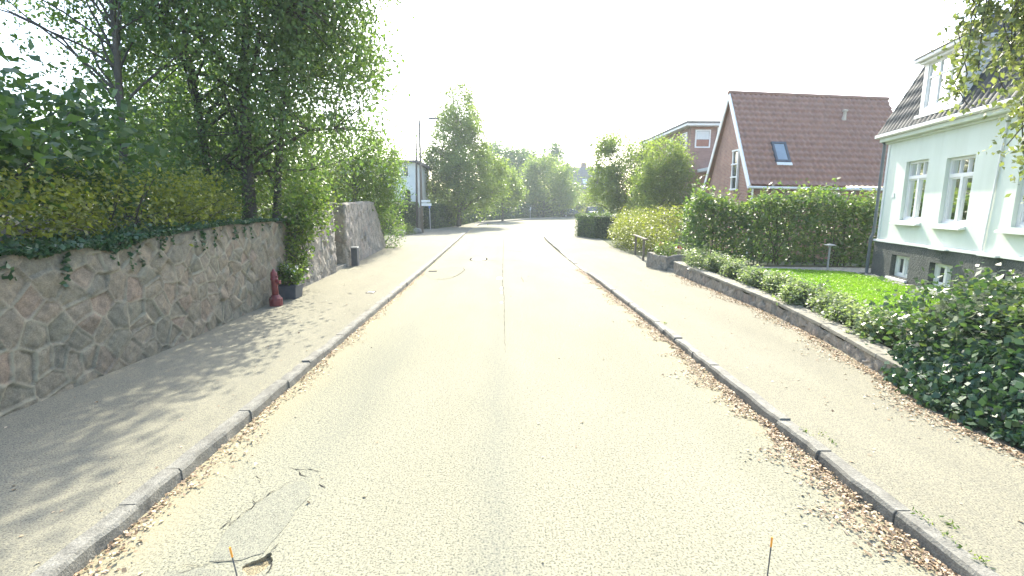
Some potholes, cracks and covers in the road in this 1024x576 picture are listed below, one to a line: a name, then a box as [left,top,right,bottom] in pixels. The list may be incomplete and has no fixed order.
crack [221,467,324,532]
pothole [242,553,273,576]
